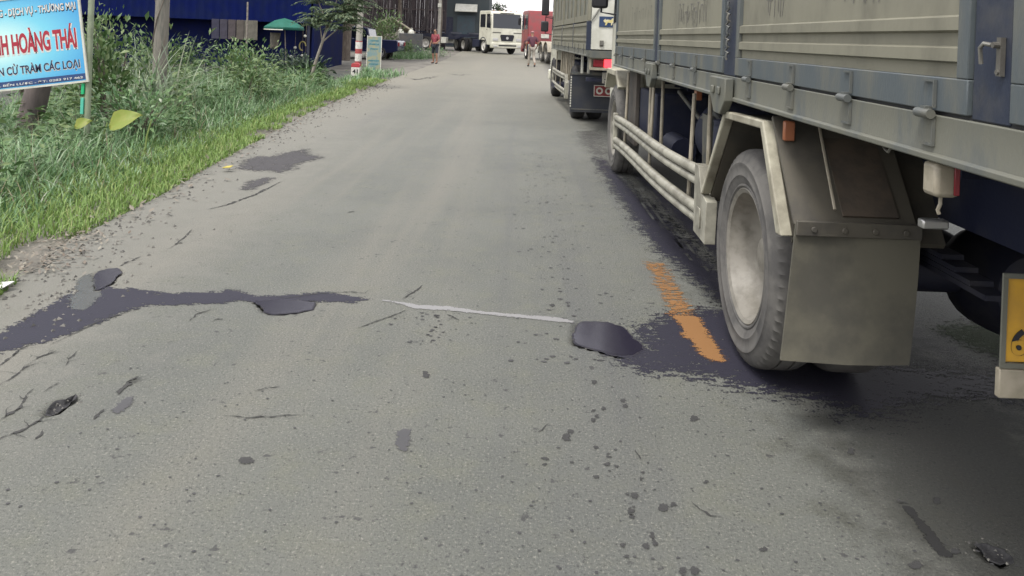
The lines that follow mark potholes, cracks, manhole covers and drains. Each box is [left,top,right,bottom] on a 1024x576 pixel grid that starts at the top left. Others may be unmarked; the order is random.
pothole [973,543,1014,567]
pothole [572,321,644,357]
crack [0,309,137,439]
crack [225,411,303,419]
crack [210,182,279,209]
pothole [45,394,77,416]
pothole [254,299,316,316]
